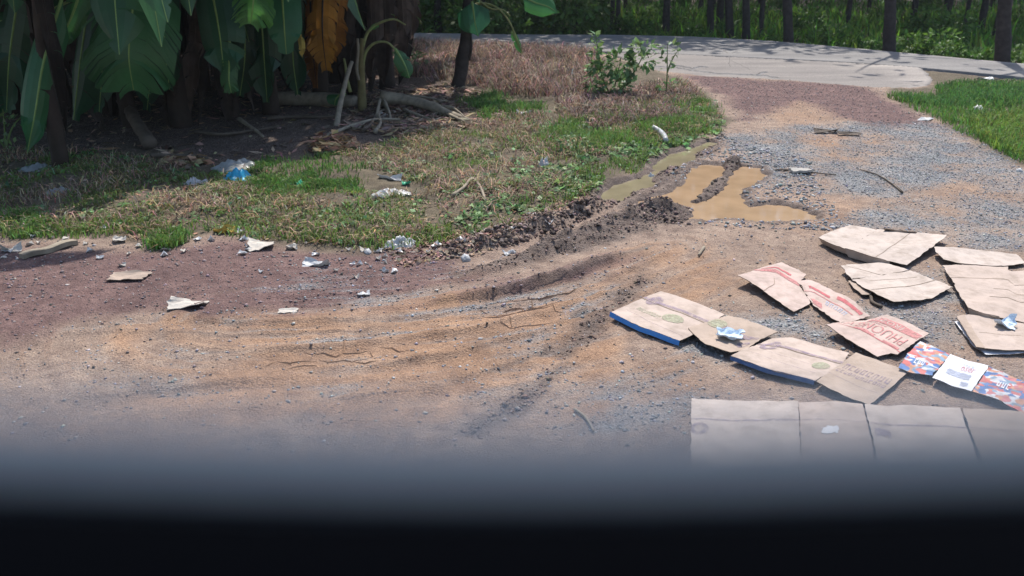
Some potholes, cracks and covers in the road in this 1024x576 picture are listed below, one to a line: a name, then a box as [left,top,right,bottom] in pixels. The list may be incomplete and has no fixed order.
pothole [613,155,830,224]
crack [477,288,577,329]
pothole [588,138,726,203]
crack [265,339,408,369]
